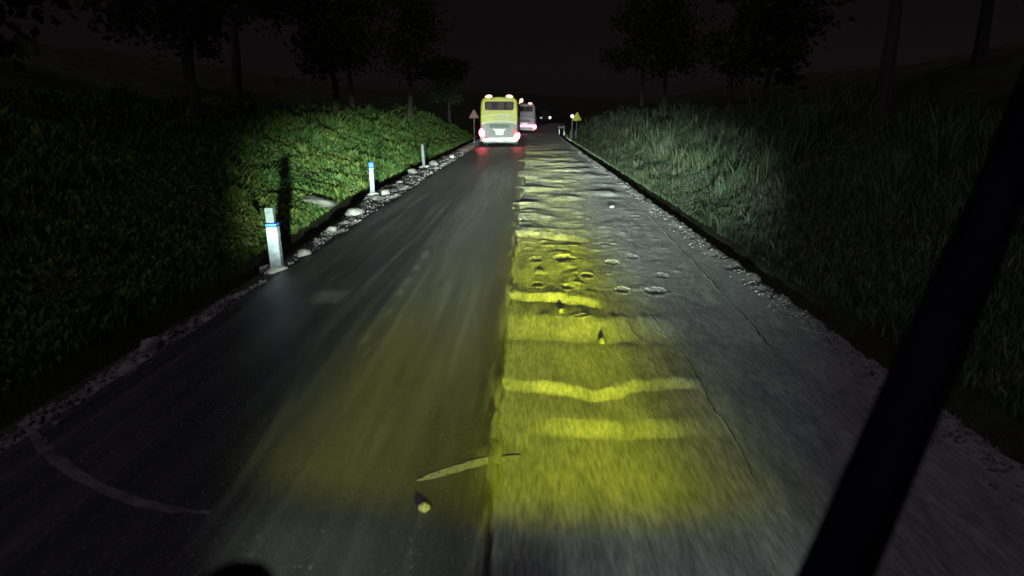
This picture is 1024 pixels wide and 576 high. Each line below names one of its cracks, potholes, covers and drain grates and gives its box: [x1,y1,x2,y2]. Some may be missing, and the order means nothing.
pothole [611,285,634,295]
pothole [548,253,582,262]
pothole [527,255,545,263]
crack [626,217,772,486]
pothole [527,280,547,288]
pothole [651,272,673,280]
pothole [640,285,672,297]
pothole [578,271,598,279]
pothole [601,258,623,267]
